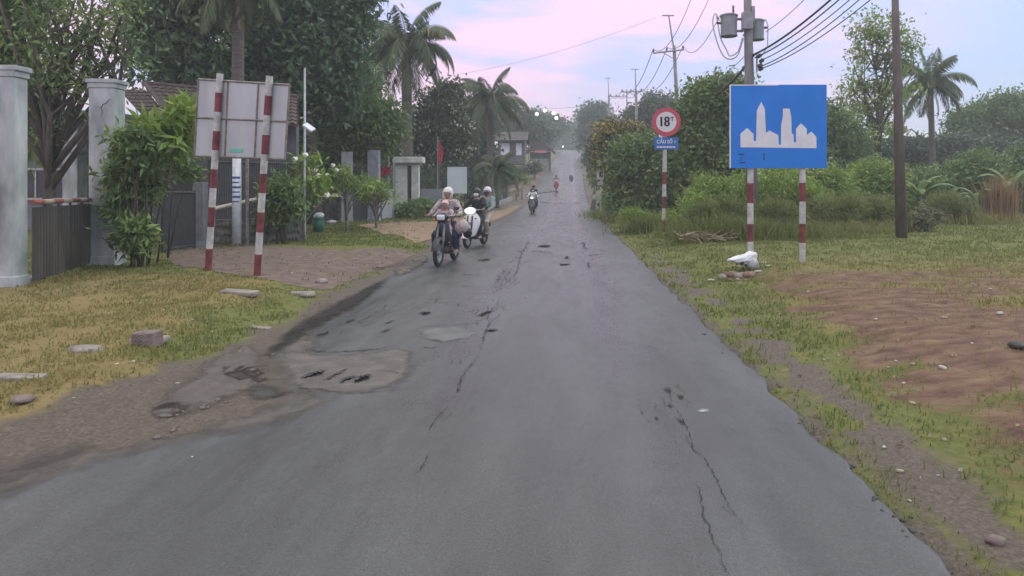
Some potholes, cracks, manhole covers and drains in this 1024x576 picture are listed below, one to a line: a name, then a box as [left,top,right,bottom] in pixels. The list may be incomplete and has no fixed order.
crack [424,268,515,391]
crack [661,384,741,576]
